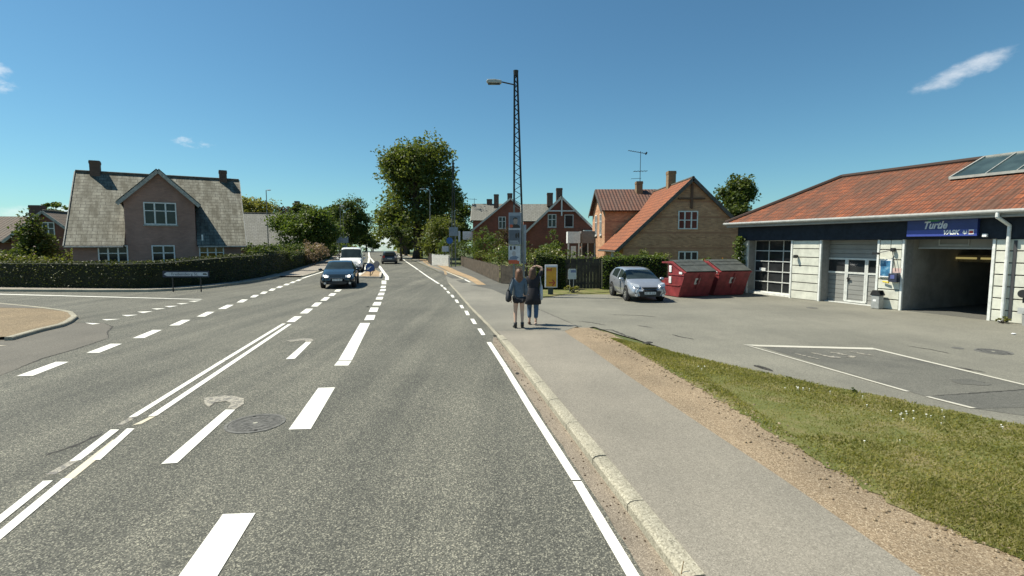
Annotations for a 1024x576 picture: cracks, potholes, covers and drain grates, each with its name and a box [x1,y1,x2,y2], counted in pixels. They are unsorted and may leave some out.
crack [46,432,103,456]
manhole cover [223,414,286,434]
